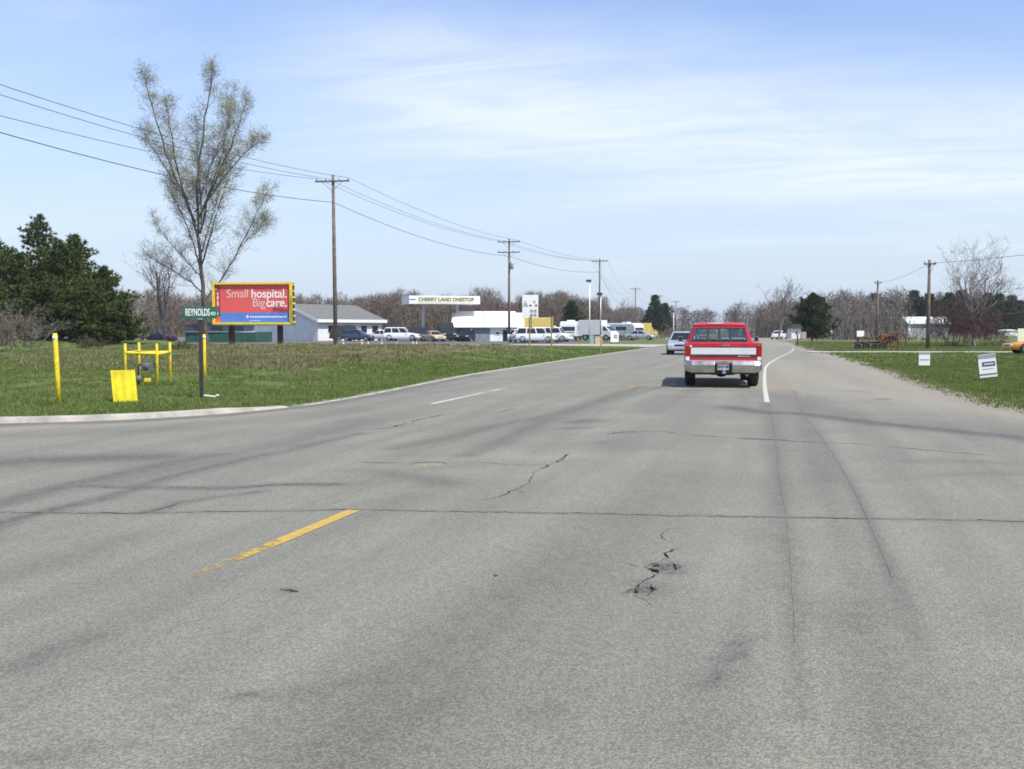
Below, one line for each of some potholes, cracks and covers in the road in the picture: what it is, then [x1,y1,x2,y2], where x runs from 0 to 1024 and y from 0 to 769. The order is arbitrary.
pothole [619,585,658,594]
pothole [647,563,684,573]
crack [0,453,1024,522]
